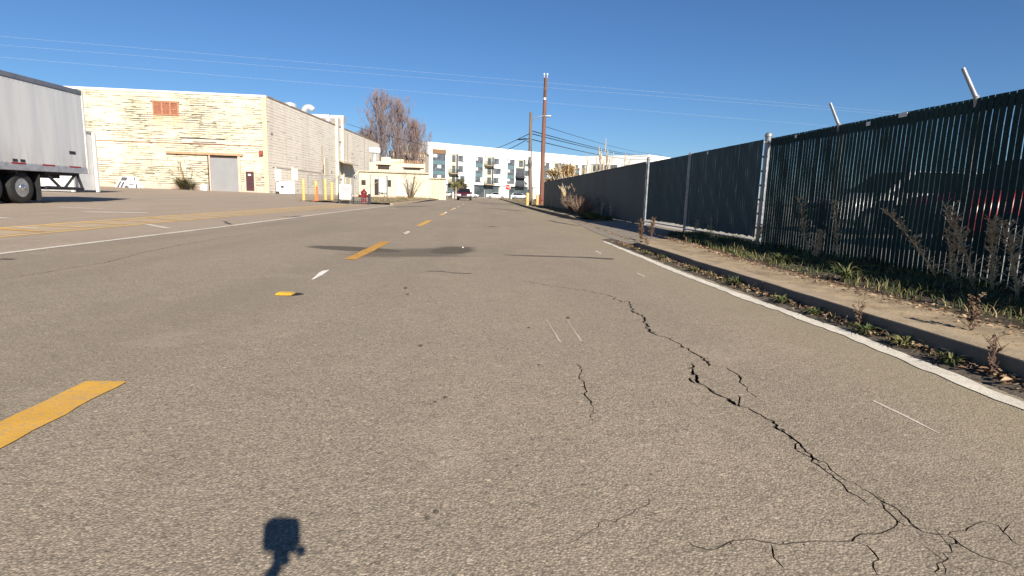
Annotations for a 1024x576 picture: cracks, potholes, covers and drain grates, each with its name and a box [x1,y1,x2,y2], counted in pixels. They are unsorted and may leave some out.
crack [532,282,1020,576]
